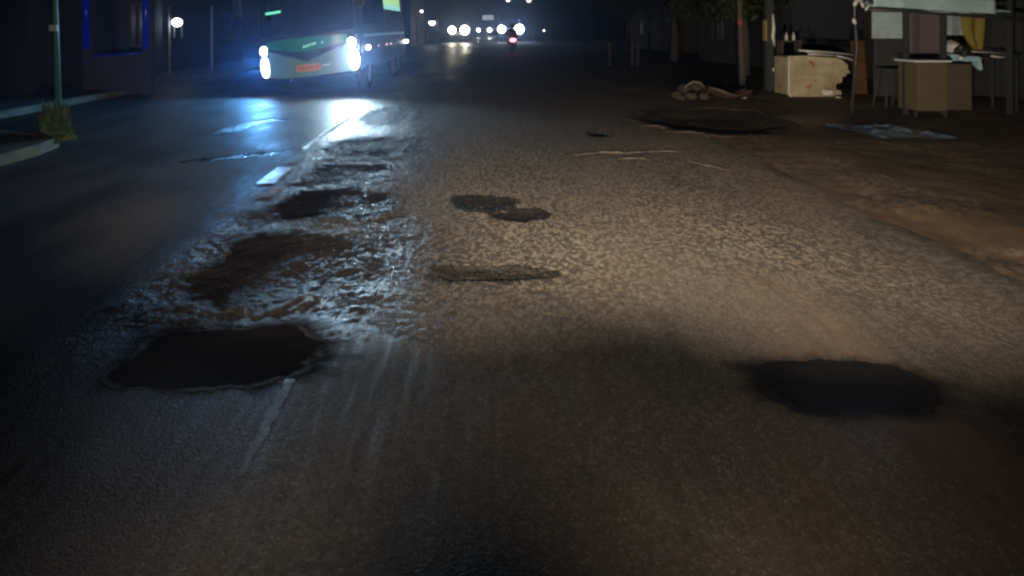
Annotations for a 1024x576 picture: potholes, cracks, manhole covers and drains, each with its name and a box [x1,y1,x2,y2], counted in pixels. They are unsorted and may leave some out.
pothole [97,324,331,394]
pothole [253,185,407,226]
crack [182,104,372,164]
pothole [447,194,523,214]
pothole [745,359,942,419]
pothole [486,207,552,223]
crack [562,150,734,172]
pothole [164,227,385,320]
pothole [585,129,611,138]
pothole [418,264,563,284]
